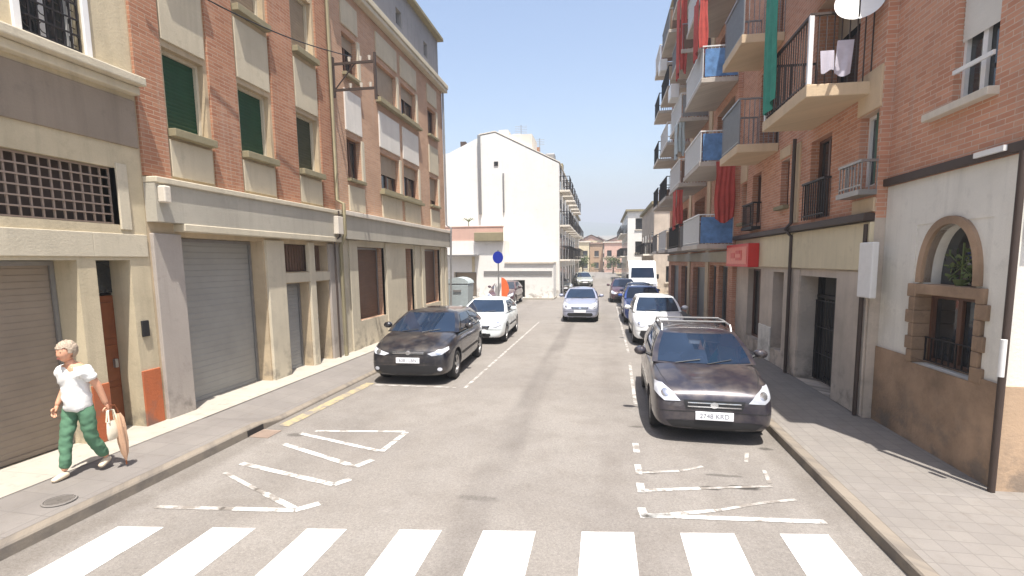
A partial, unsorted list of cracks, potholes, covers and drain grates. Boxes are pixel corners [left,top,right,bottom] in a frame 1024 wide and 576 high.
manhole cover [40,493,78,507]
drain grate [247,424,282,438]
